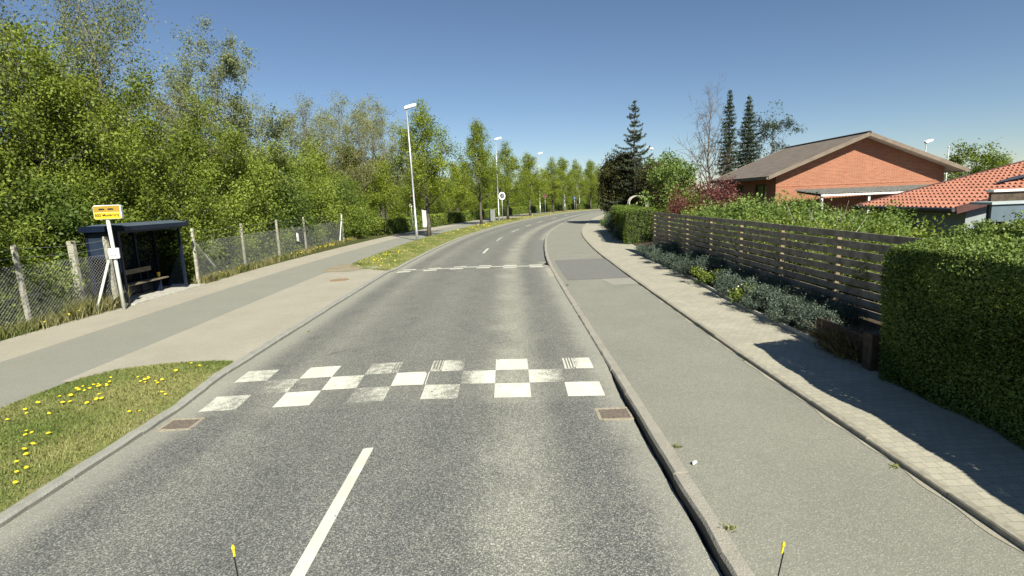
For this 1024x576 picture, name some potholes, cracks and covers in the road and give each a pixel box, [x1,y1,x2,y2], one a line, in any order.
drain grate [595,407,635,421]
drain grate [155,417,205,432]
